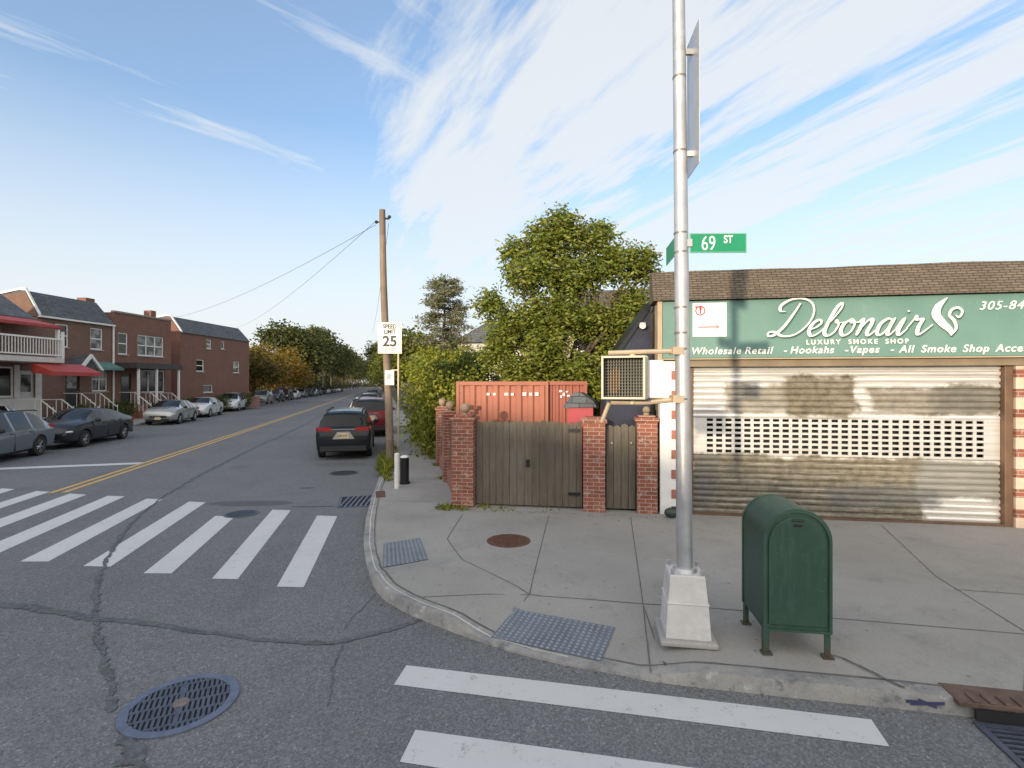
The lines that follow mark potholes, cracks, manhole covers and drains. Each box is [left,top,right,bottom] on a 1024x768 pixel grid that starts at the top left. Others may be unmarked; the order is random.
crack [326,594,375,707]
manhole cover [116,673,240,740]
crack [90,492,168,768]
manhole cover [487,534,531,548]
drain grate [337,491,385,508]
manhole cover [223,510,259,518]
